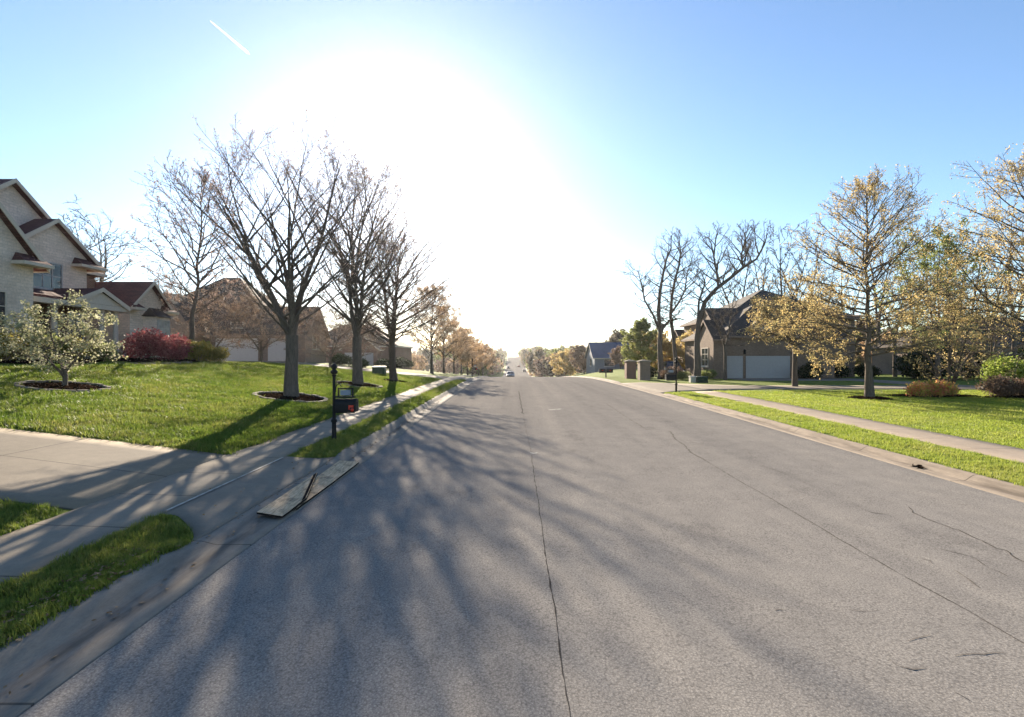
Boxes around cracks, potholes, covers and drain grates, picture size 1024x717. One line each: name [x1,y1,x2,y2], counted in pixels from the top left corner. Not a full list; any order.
crack [893,507,1024,588]
